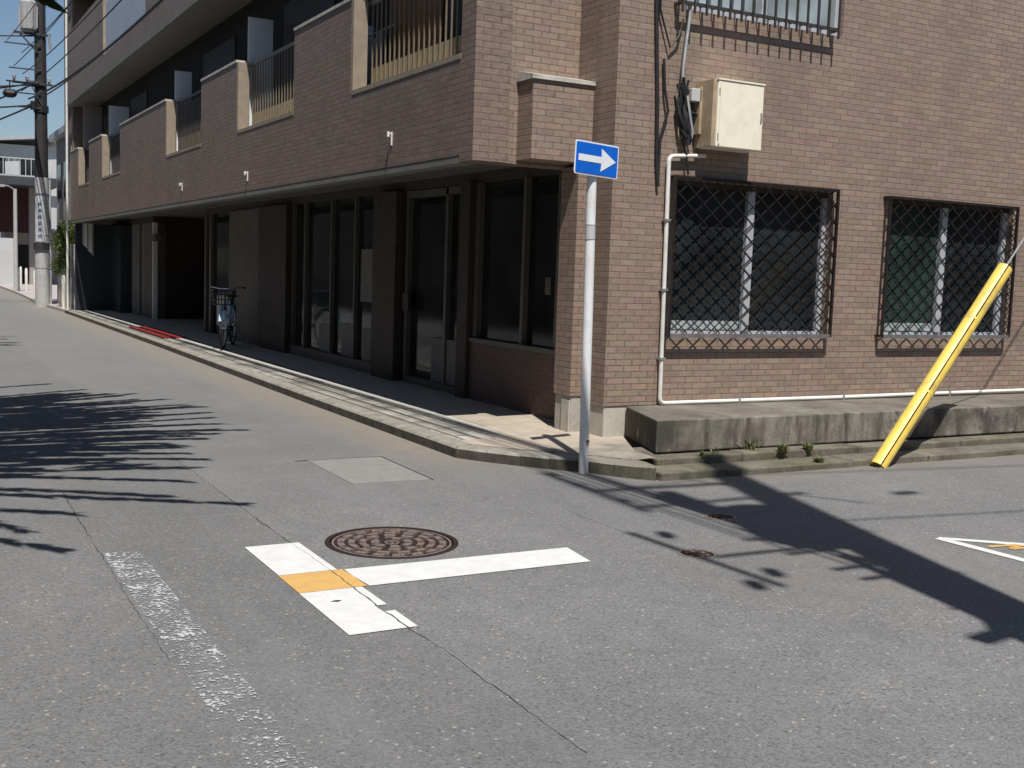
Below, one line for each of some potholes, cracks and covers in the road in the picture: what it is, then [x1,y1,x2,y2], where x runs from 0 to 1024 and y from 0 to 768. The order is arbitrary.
utility cover [677,549,717,559]
manhole cover [325,527,459,559]
crack [169,454,587,753]
crack [63,493,171,662]
